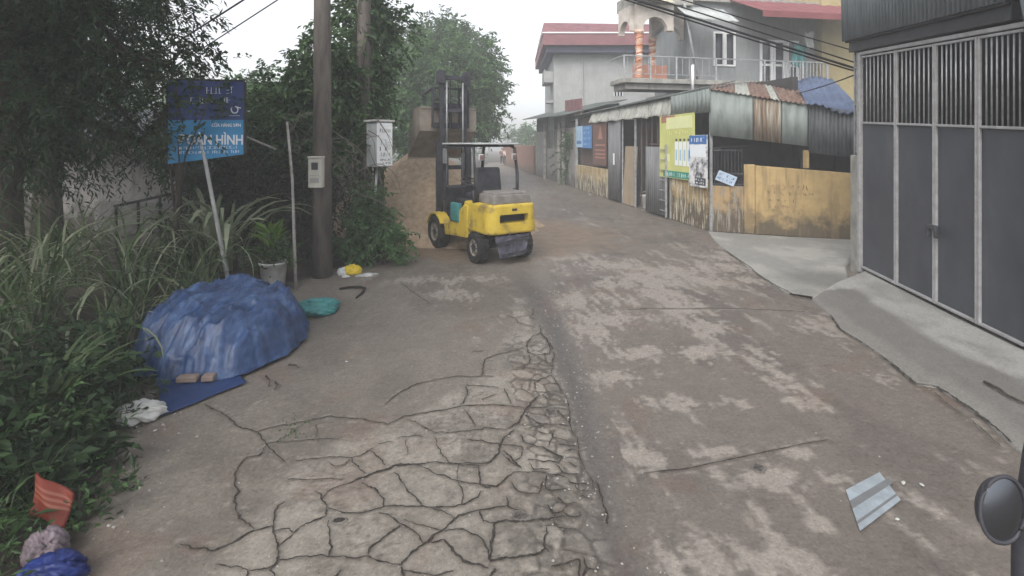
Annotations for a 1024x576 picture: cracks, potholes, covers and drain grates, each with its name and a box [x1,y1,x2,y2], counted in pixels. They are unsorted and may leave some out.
crack [180,310,609,576]
